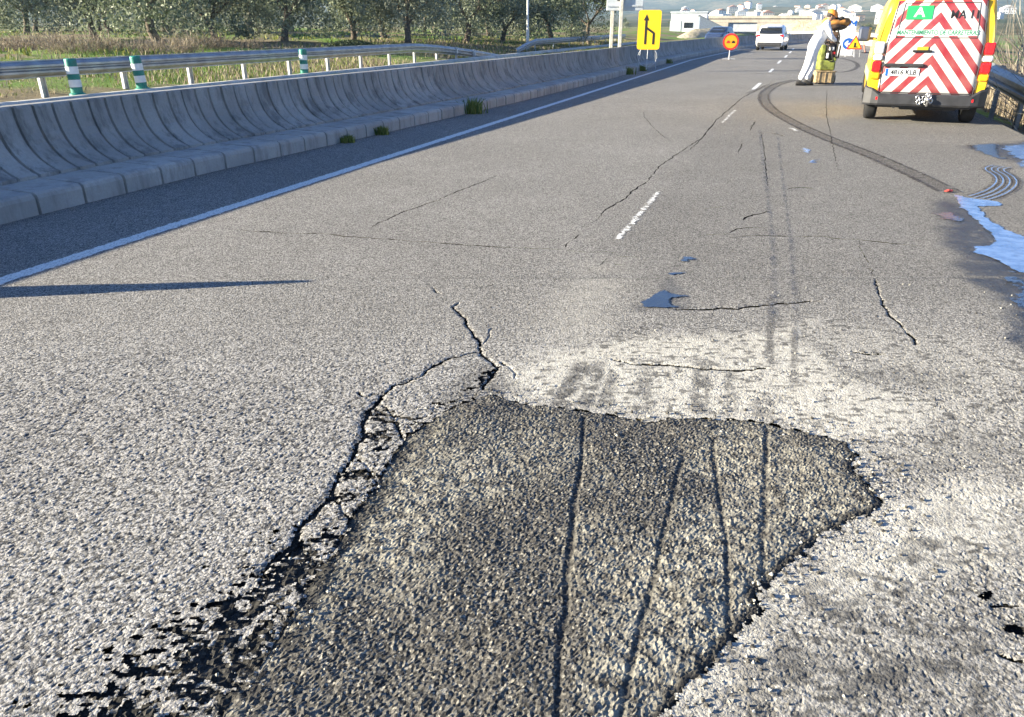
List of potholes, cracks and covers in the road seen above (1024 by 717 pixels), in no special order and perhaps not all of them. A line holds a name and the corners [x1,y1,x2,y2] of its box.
crack [371,177,493,228]
pothole [1003,624,1024,637]
pothole [977,590,1000,608]
crack [260,291,504,580]
crack [700,302,805,311]
crack [858,243,917,345]
crack [241,603,303,696]
crack [588,73,770,225]
crack [624,362,758,372]
